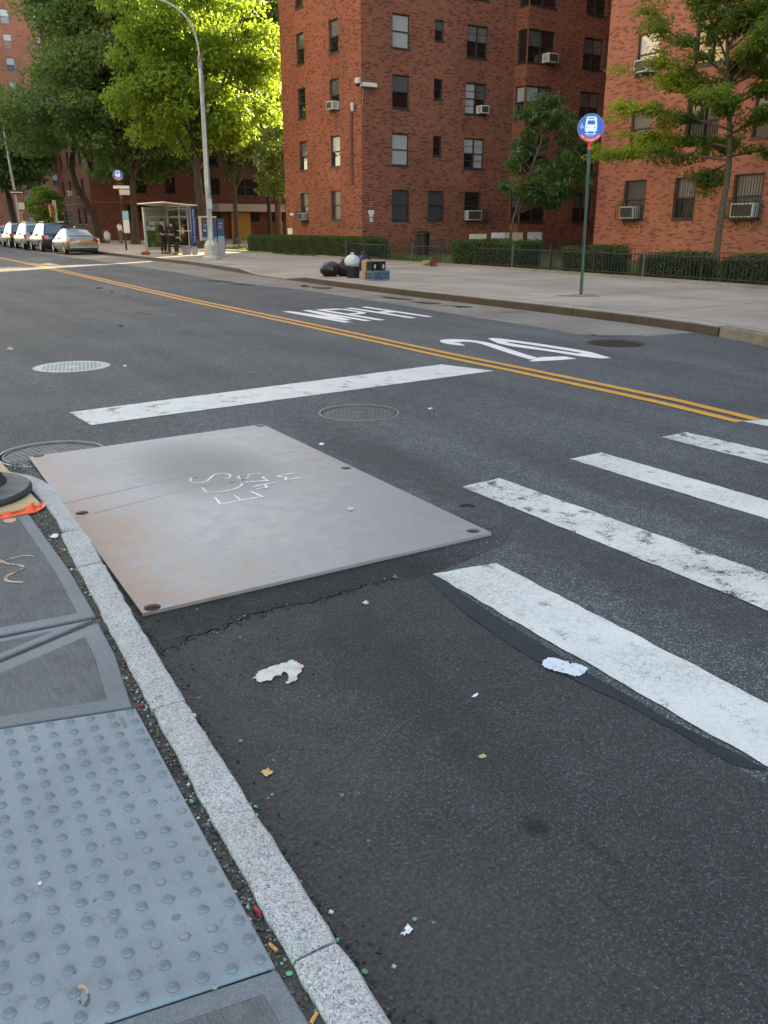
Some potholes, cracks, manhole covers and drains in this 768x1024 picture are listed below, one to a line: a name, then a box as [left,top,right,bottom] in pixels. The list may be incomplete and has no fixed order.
manhole cover [0,440,103,467]
crack [160,579,398,654]
manhole cover [319,404,399,421]
manhole cover [32,361,110,372]
